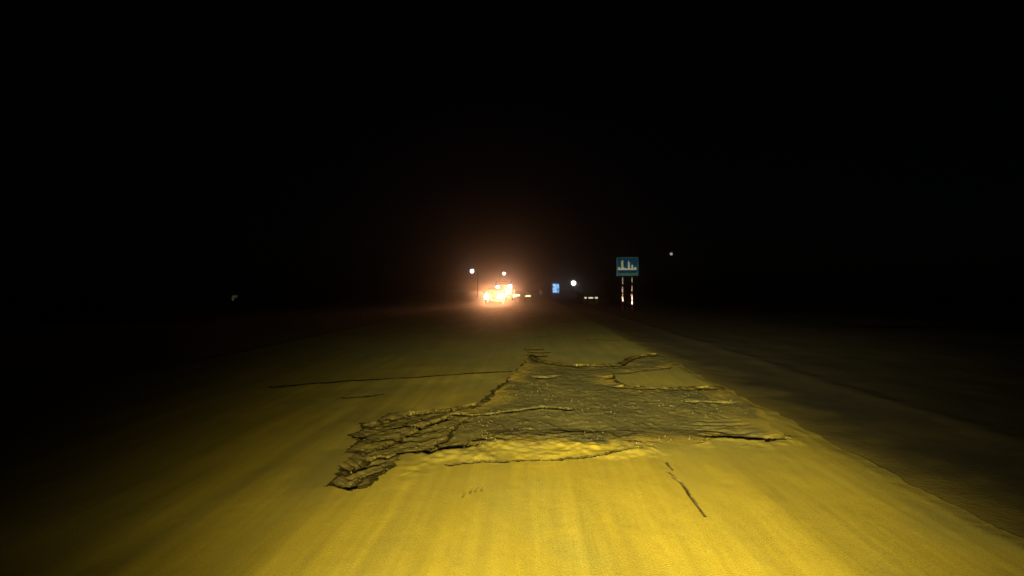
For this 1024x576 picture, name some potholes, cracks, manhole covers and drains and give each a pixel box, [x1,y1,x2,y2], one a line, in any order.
pothole [324,353,789,491]
crack [664,461,707,517]
crack [267,348,551,399]
